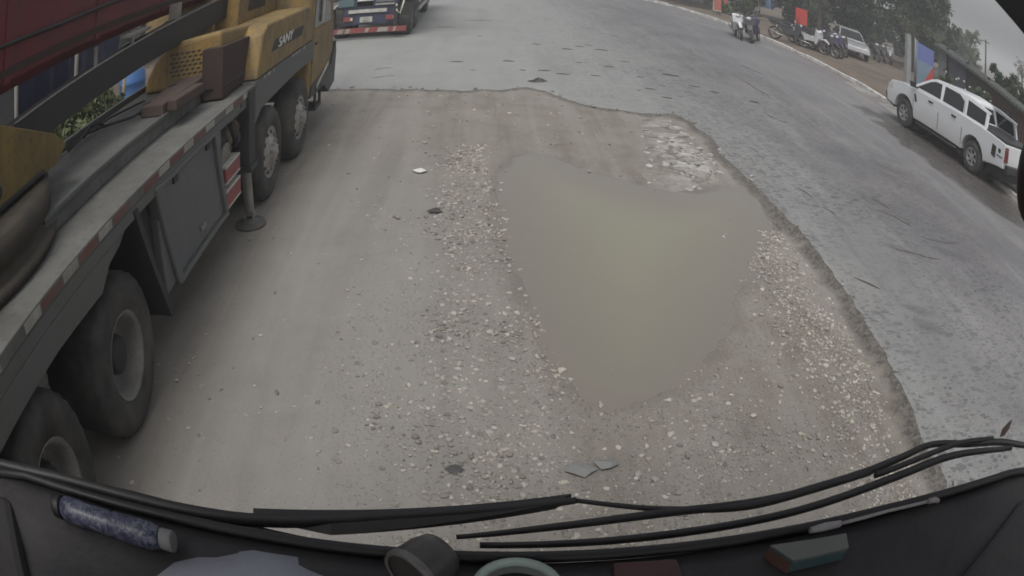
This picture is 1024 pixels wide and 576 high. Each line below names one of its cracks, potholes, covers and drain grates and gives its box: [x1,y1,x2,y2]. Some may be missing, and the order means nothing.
pothole [38,87,947,563]
crack [872,198,953,260]
